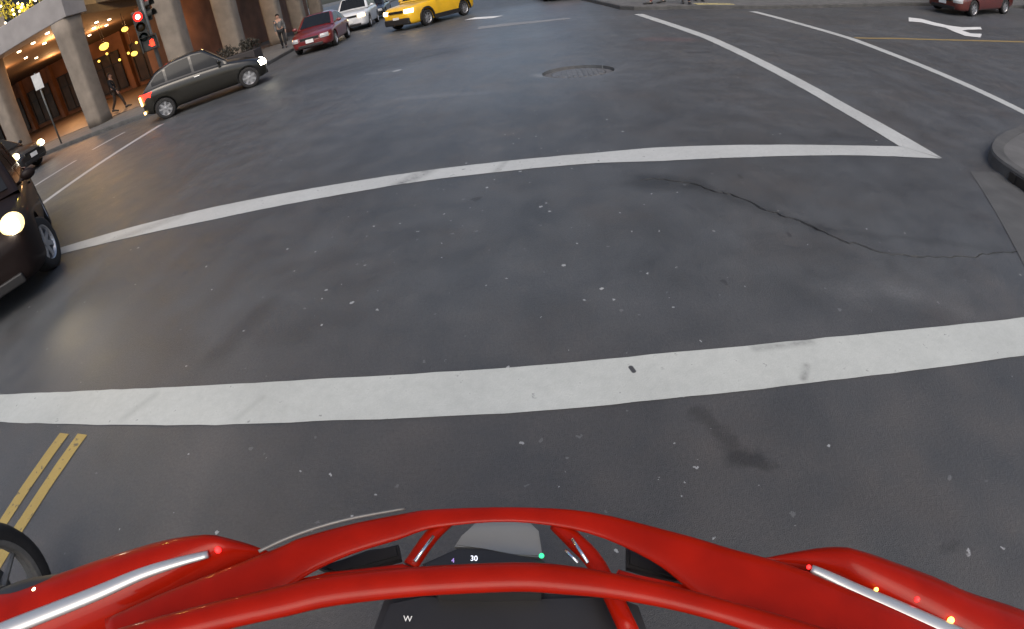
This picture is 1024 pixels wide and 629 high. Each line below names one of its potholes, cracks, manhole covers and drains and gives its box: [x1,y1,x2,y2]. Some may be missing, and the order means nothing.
manhole cover [544,68,612,78]
